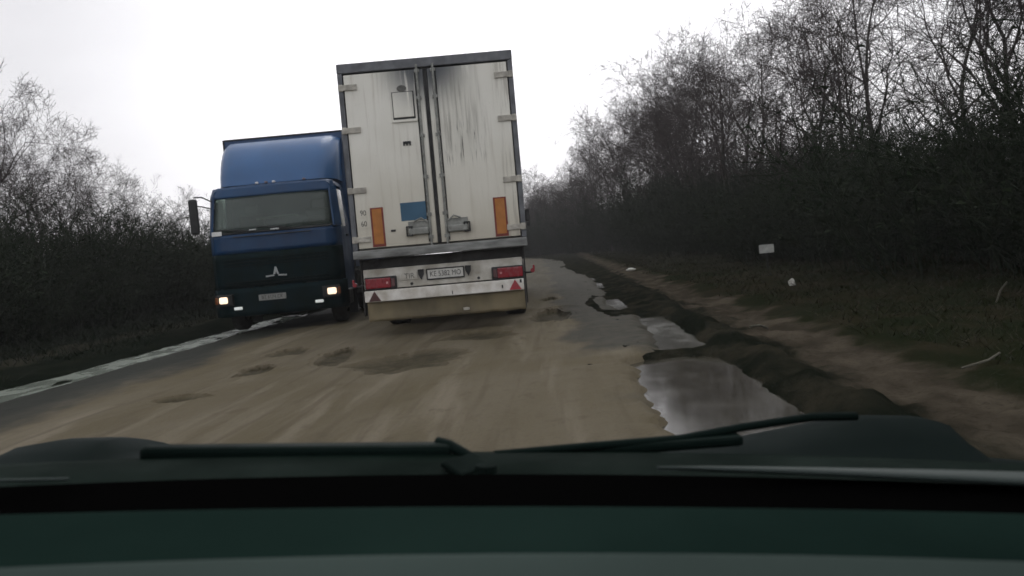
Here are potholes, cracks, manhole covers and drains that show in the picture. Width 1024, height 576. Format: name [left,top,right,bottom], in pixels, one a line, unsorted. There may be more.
pothole [260,346,316,358]
pothole [142,392,223,405]
pothole [330,347,478,377]
pothole [225,363,283,379]
pothole [308,347,362,368]
pothole [524,307,576,323]
